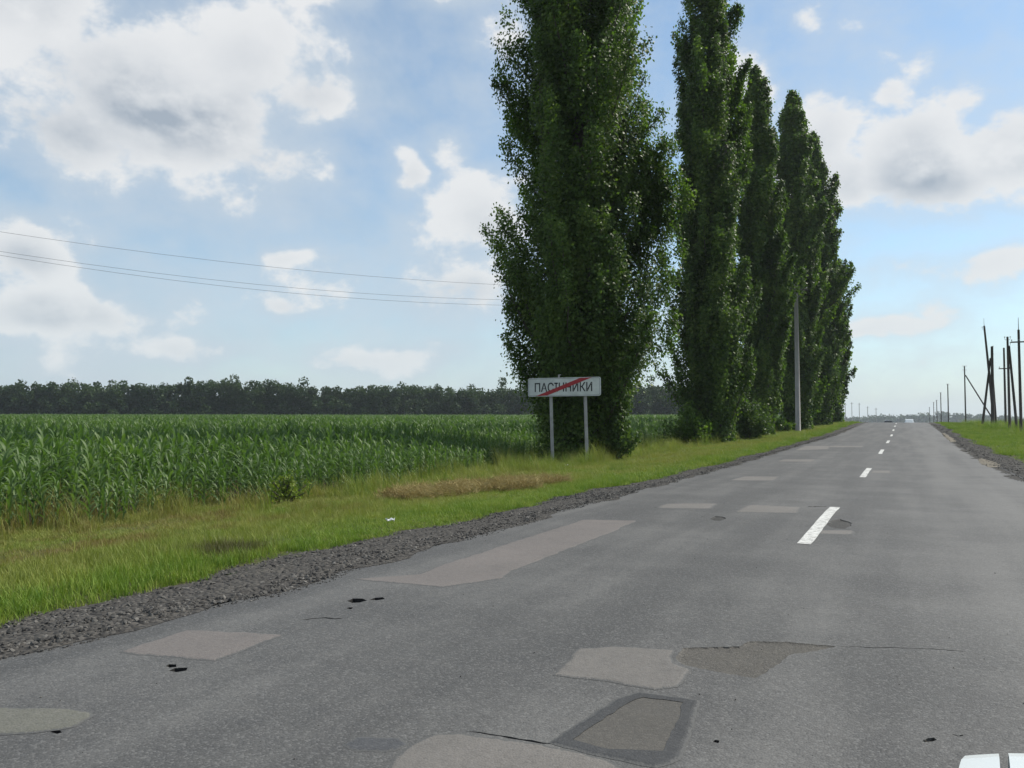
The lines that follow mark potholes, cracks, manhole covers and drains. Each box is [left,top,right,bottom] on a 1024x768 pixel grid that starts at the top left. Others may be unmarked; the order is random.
crack [466,731,548,744]
pothole [827,519,852,529]
